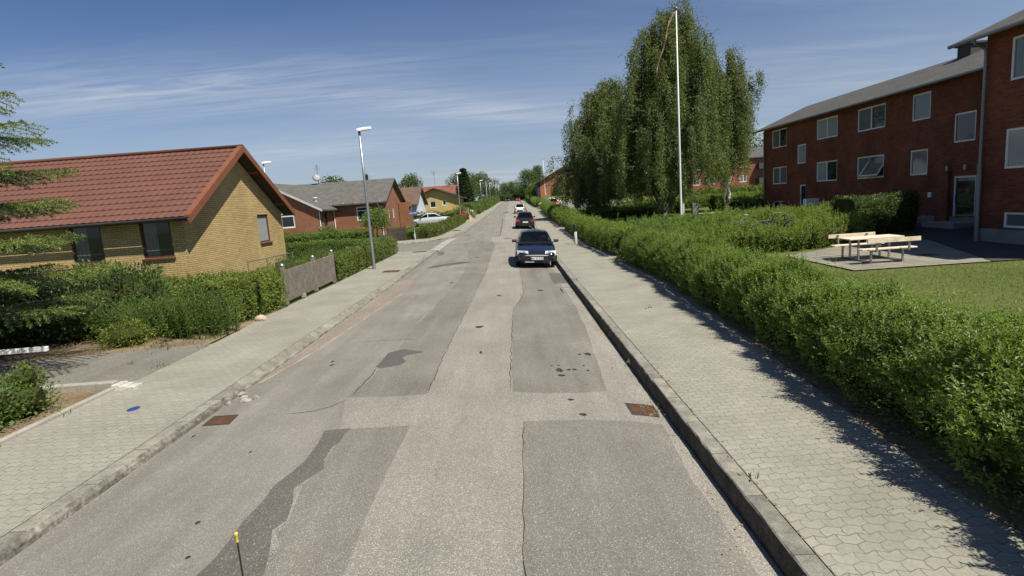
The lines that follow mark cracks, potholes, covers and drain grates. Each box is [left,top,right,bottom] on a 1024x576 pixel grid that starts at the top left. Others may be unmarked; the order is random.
crack [290,369,376,414]
